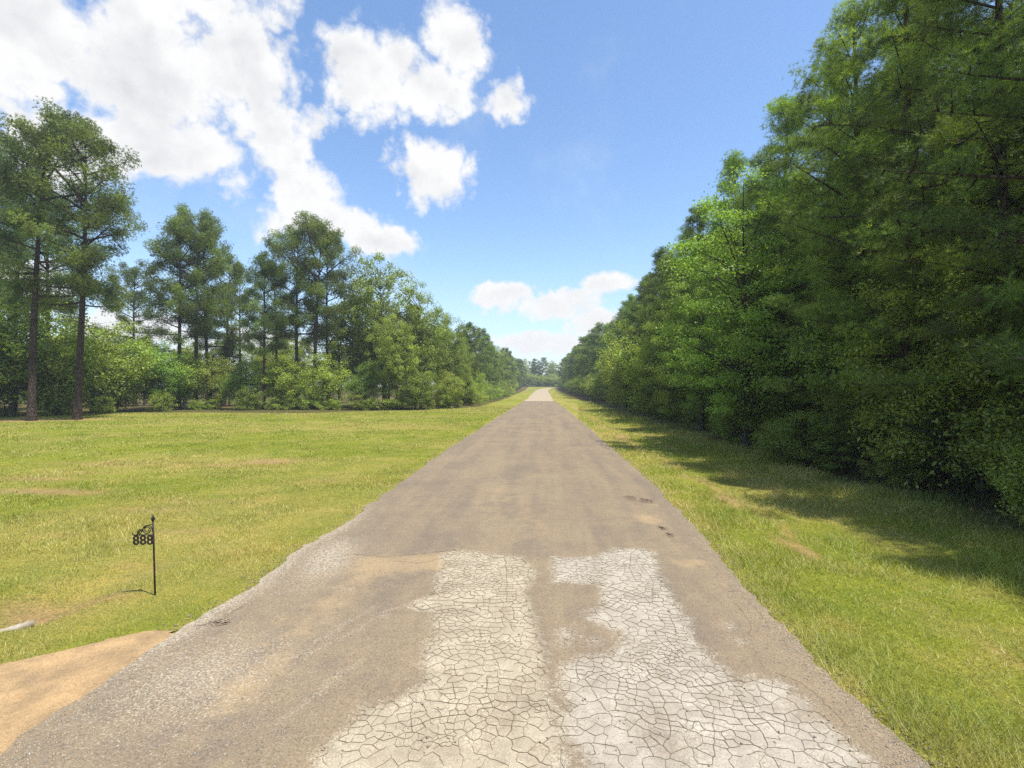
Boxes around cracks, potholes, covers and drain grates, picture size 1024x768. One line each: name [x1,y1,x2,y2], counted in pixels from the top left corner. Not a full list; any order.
crack [314,548,876,768]
